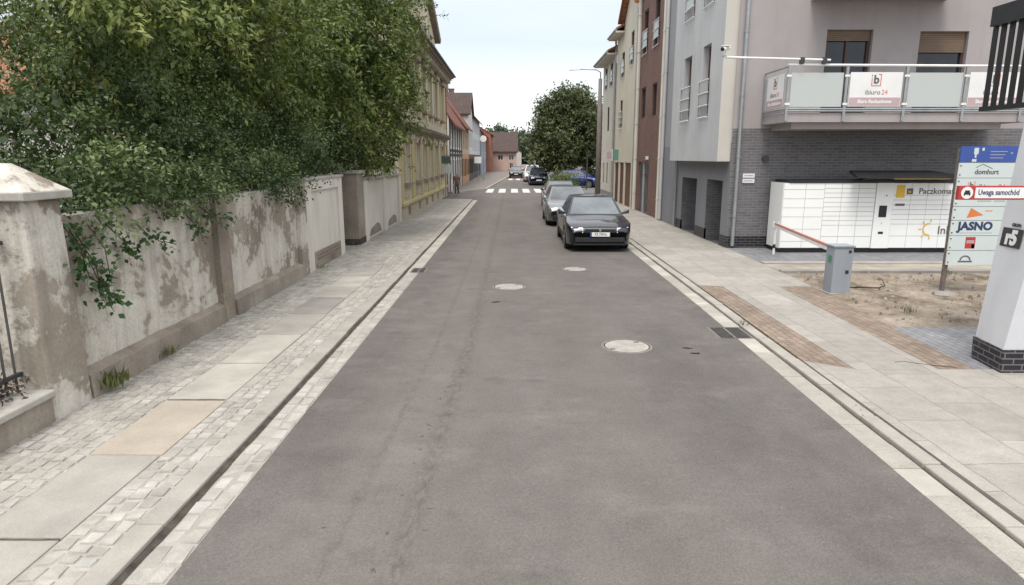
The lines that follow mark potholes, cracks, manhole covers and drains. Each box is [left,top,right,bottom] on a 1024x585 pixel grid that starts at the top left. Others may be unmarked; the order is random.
crack [369,360,457,573]
drain grate [707,327,754,339]
manhole cover [601,339,653,354]
